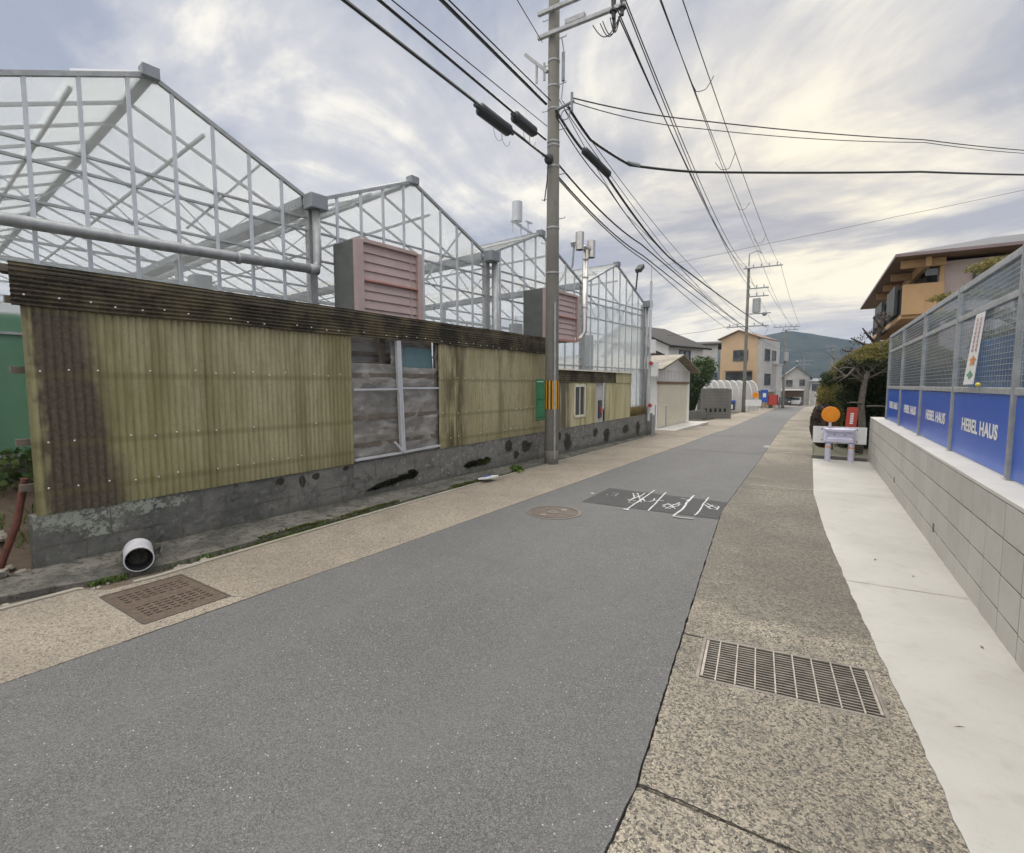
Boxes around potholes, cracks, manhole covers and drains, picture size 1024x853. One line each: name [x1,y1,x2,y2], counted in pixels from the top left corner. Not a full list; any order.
manhole cover [527,505,581,520]
drain grate [695,637,891,721]
